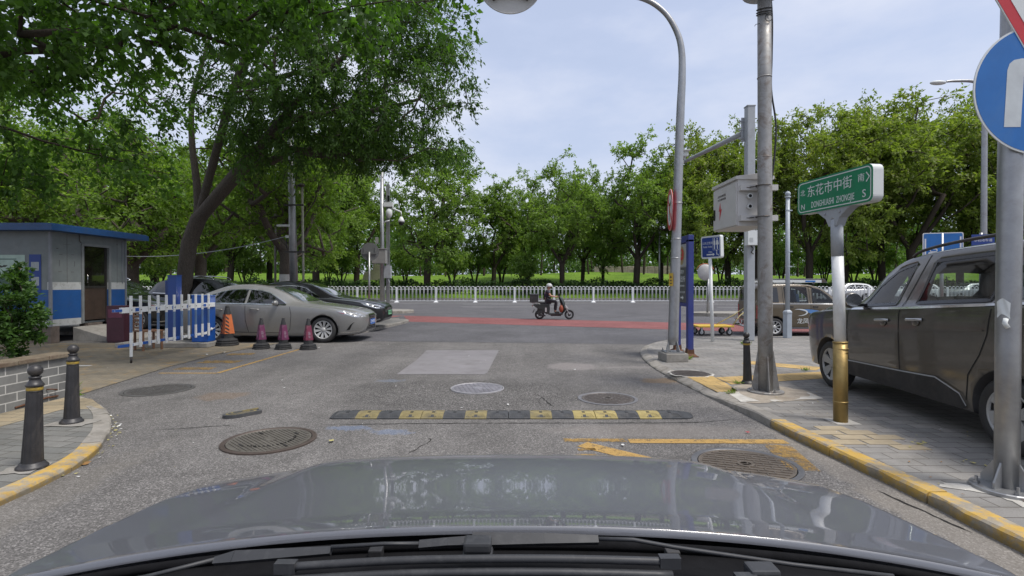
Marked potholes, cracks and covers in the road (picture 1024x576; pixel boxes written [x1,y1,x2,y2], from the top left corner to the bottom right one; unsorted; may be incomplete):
manhole cover [450,383,504,394]
manhole cover [691,447,805,481]
manhole cover [119,383,195,397]
crack [880,491,968,531]
manhole cover [578,392,638,406]
